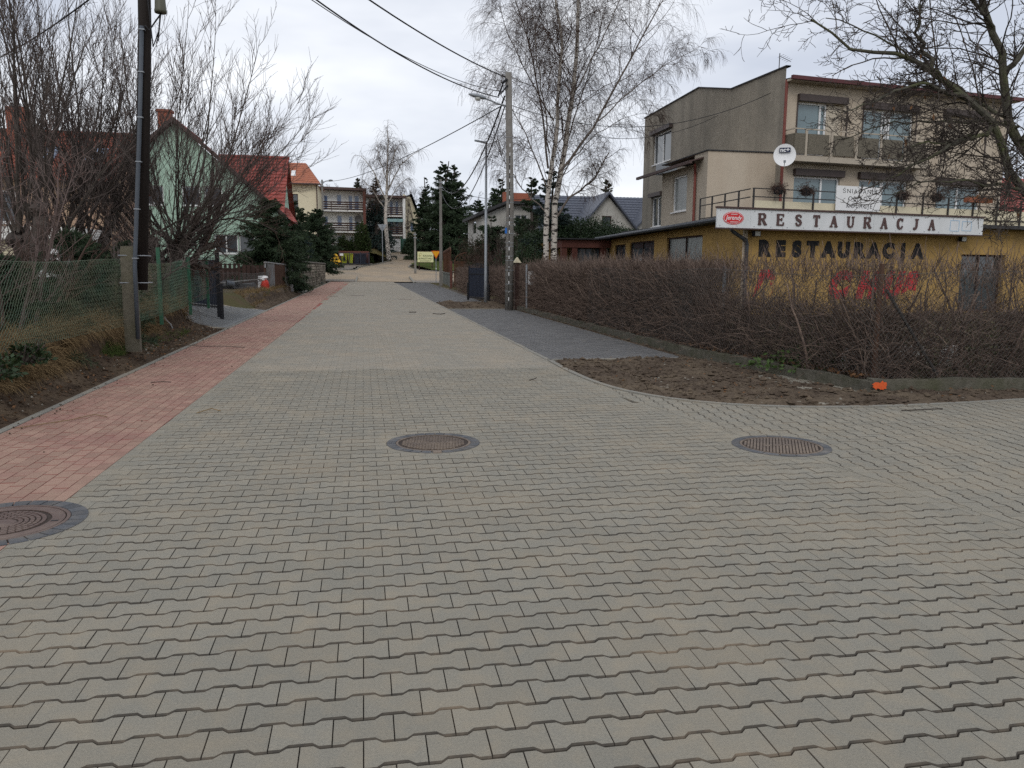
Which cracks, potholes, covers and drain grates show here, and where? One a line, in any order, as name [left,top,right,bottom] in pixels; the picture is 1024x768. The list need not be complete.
manhole cover [0,500,89,546]
manhole cover [387,433,480,453]
manhole cover [731,435,832,457]
